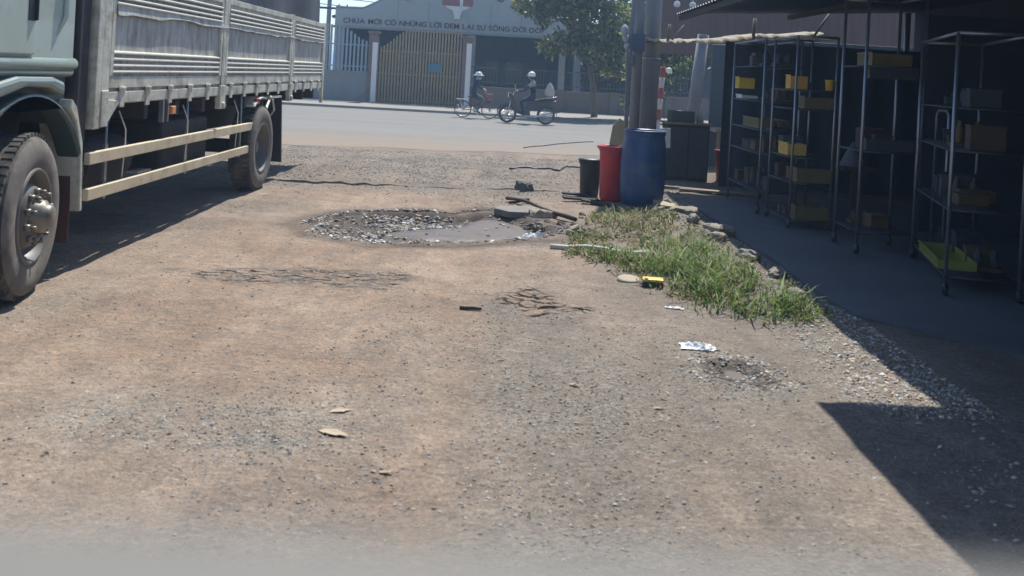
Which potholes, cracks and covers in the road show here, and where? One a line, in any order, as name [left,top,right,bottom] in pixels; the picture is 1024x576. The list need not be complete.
pothole [279,208,593,248]
pothole [673,349,808,396]
